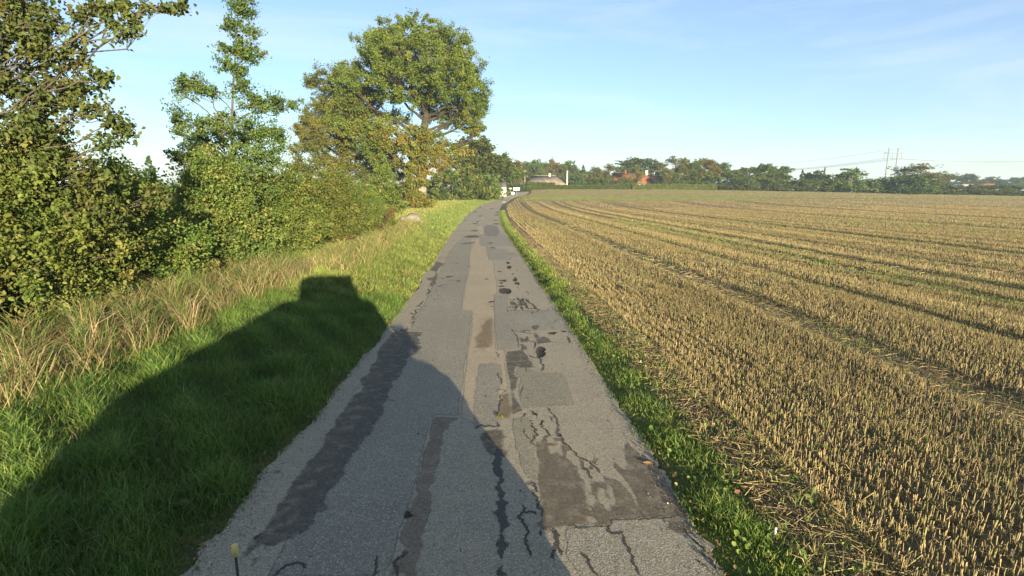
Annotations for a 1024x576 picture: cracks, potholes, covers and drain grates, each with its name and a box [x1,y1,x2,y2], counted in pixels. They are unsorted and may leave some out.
crack [472,291,571,428]
crack [517,482,563,559]
crack [622,535,640,576]
crack [523,408,600,479]
crack [410,280,452,325]
crack [274,561,306,576]
